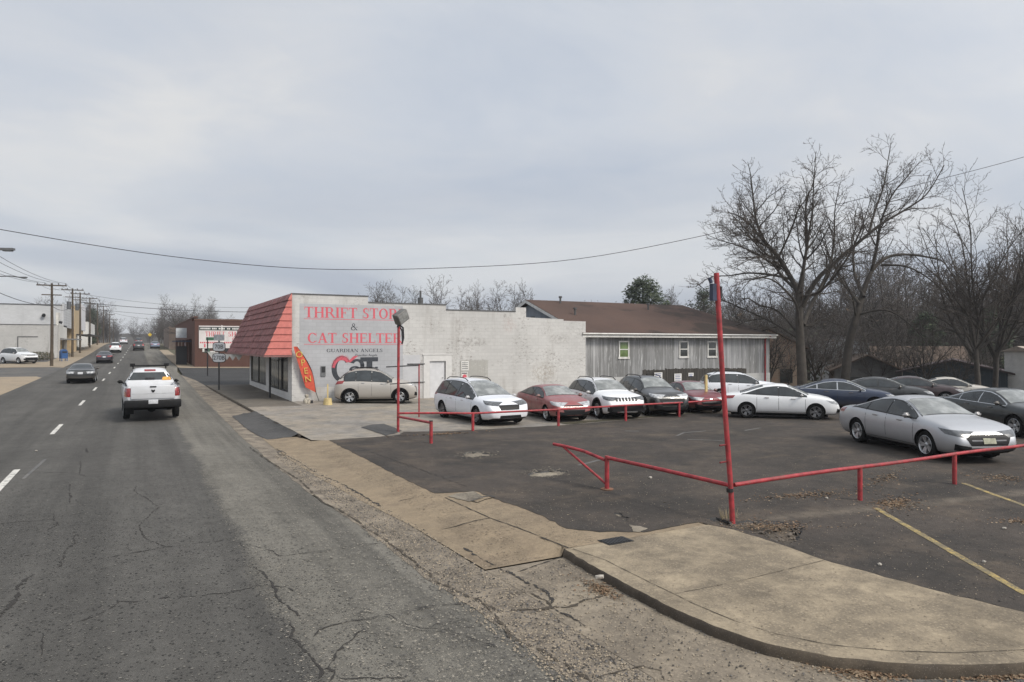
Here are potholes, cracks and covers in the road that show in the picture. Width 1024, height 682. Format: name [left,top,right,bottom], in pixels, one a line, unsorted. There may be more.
crack [289,601,497,682]
crack [80,585,262,621]
crack [0,574,33,633]
crack [8,448,88,567]
crack [99,486,220,559]
